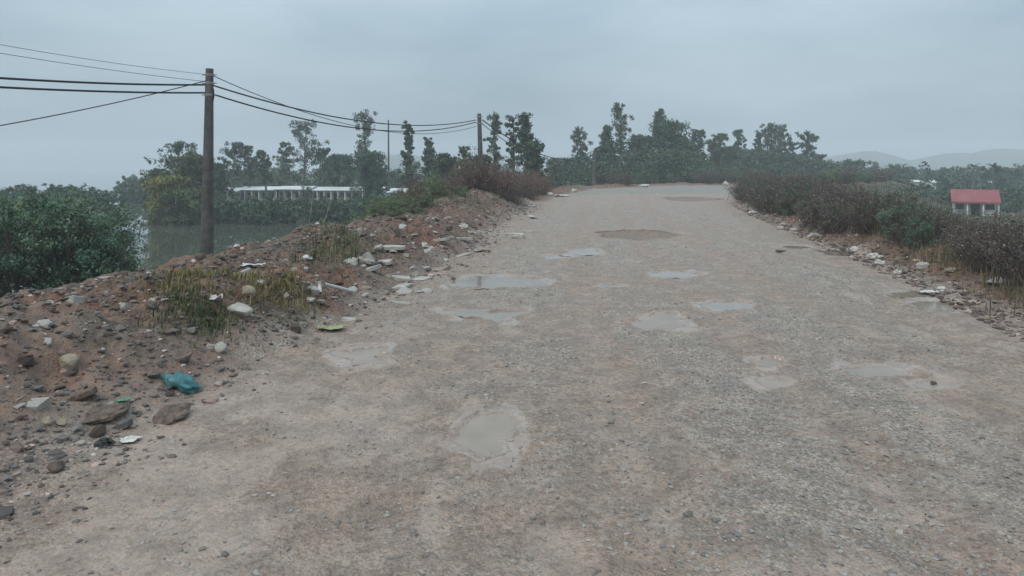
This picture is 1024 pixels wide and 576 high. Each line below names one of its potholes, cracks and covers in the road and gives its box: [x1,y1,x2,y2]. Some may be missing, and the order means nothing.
pothole [430,406,533,470]
pothole [743,374,806,393]
pothole [321,342,404,368]
pothole [738,353,797,371]
pothole [692,297,764,314]
pothole [636,268,714,280]
pothole [417,306,542,325]
pothole [587,228,688,242]
pothole [830,361,921,382]
pothole [620,309,698,333]
pothole [554,247,613,257]
pothole [435,273,568,292]
